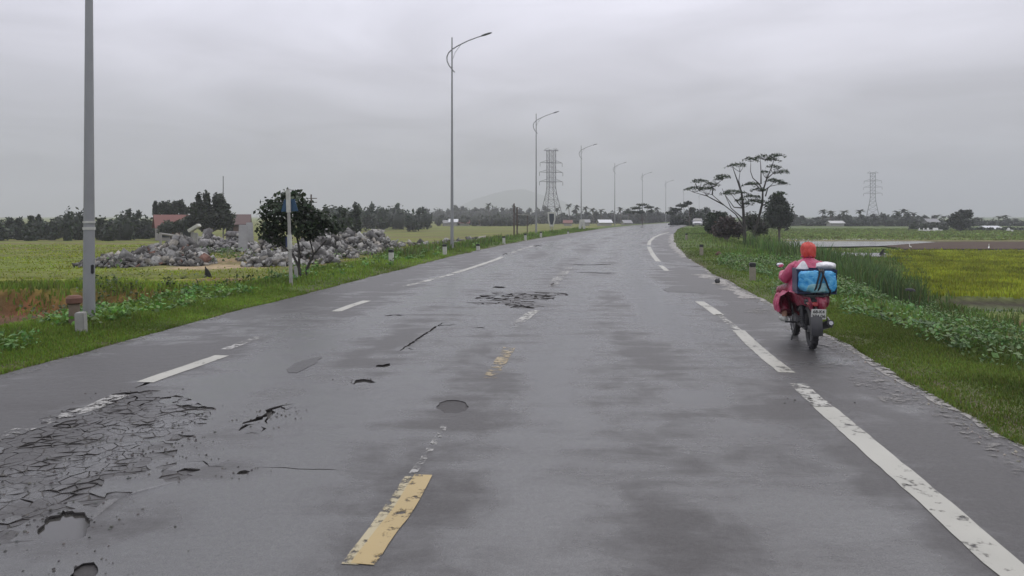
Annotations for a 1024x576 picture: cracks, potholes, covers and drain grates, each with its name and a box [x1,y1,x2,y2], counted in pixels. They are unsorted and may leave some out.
crack [386,315,443,351]
pothole [436,400,469,413]
crack [0,380,222,545]
crack [239,404,292,434]
pothole [37,510,90,543]
pothole [70,562,98,576]
